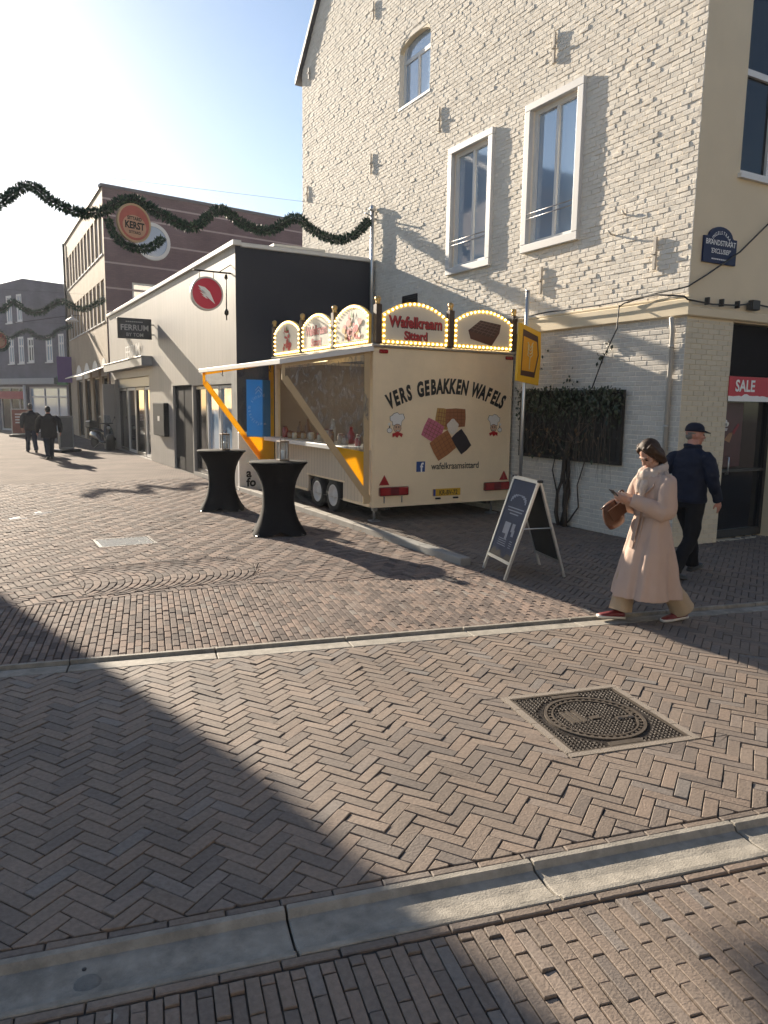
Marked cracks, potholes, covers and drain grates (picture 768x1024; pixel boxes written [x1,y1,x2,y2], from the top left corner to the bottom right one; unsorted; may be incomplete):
manhole cover [500,684,701,758]
manhole cover [92,536,157,548]
